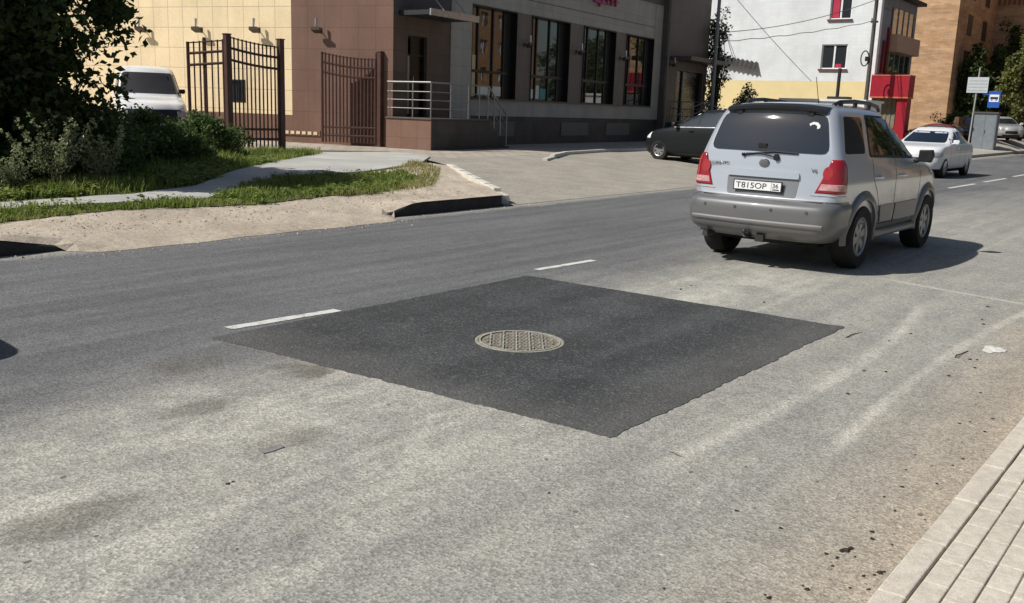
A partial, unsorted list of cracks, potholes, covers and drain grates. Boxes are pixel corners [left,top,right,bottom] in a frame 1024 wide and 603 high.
manhole cover [475,330,565,353]
